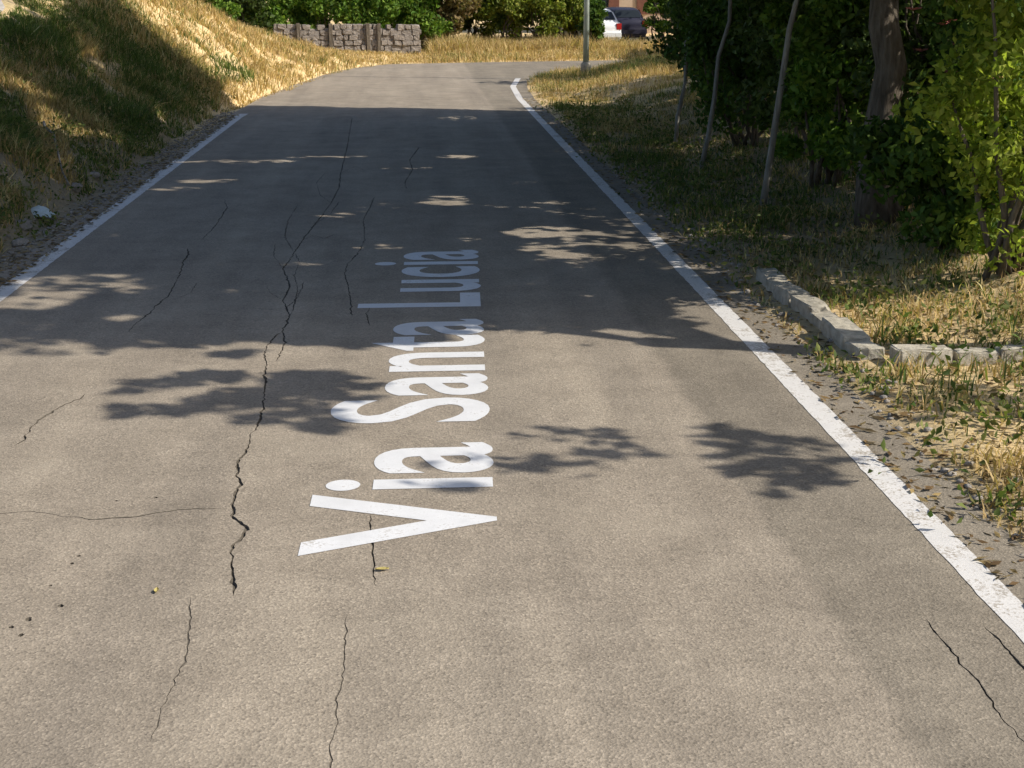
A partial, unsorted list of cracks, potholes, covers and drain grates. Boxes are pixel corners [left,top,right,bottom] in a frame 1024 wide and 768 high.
crack [150,599,192,742]
crack [344,197,375,326]
crack [329,616,348,768]
crack [0,119,363,595]
crack [927,620,1024,742]
